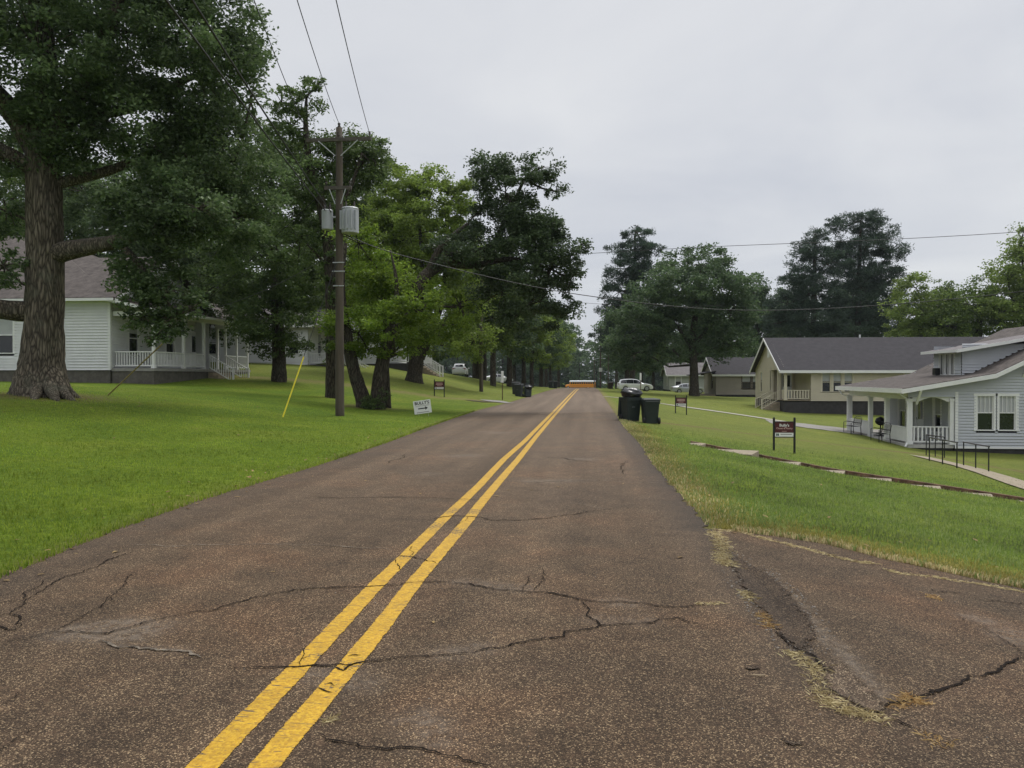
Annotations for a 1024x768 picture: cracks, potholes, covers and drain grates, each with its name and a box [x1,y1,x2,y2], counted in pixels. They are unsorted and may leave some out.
crack [322,734,494,765]
crack [317,496,614,520]
crack [0,543,723,692]
crack [875,615,1022,726]
